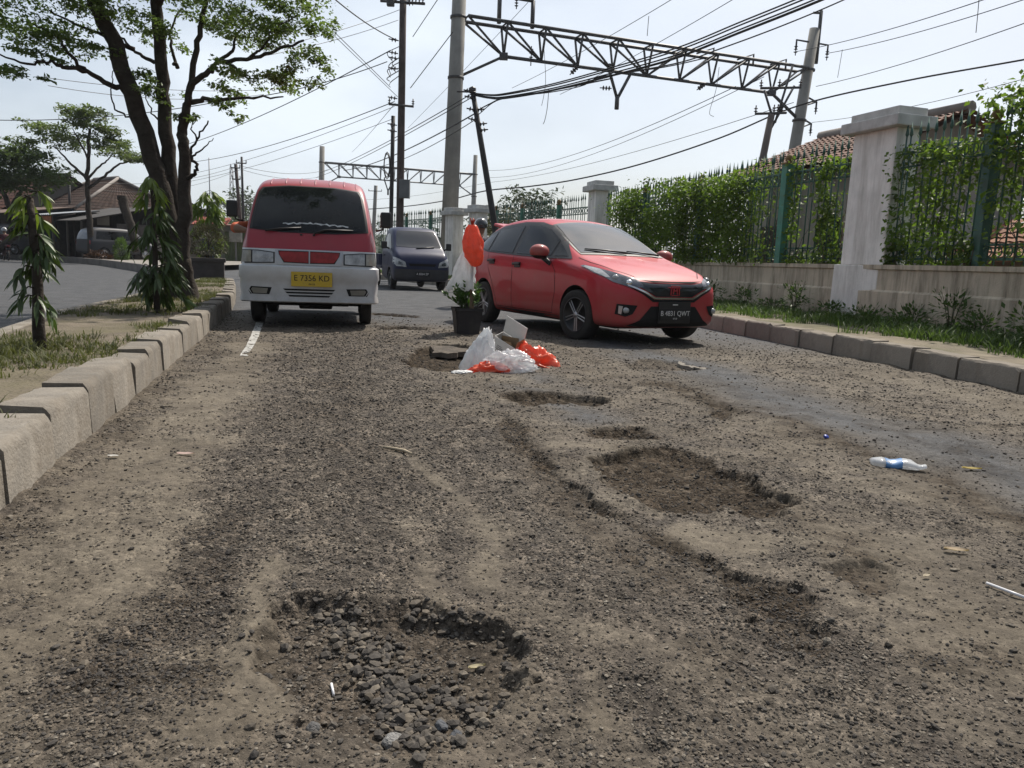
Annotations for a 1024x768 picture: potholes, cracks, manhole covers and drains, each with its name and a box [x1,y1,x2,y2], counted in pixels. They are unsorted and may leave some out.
pothole [492,417,846,663]
pothole [498,389,612,408]
pothole [400,344,547,373]
pothole [240,590,544,764]
pothole [822,558,903,600]
